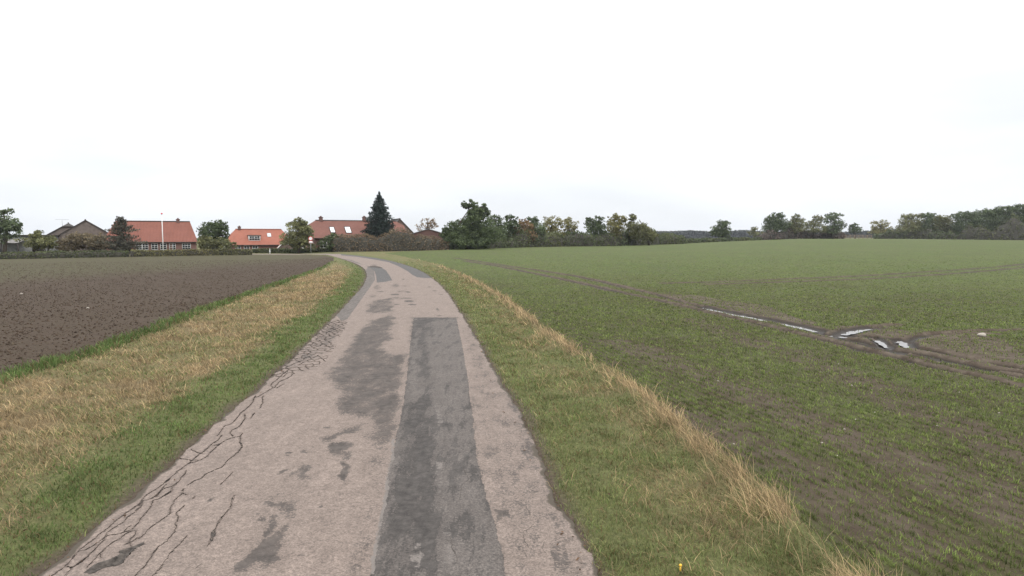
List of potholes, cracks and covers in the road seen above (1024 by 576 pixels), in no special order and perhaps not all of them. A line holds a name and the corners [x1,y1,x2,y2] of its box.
crack [51,371,293,576]
crack [275,320,347,377]
